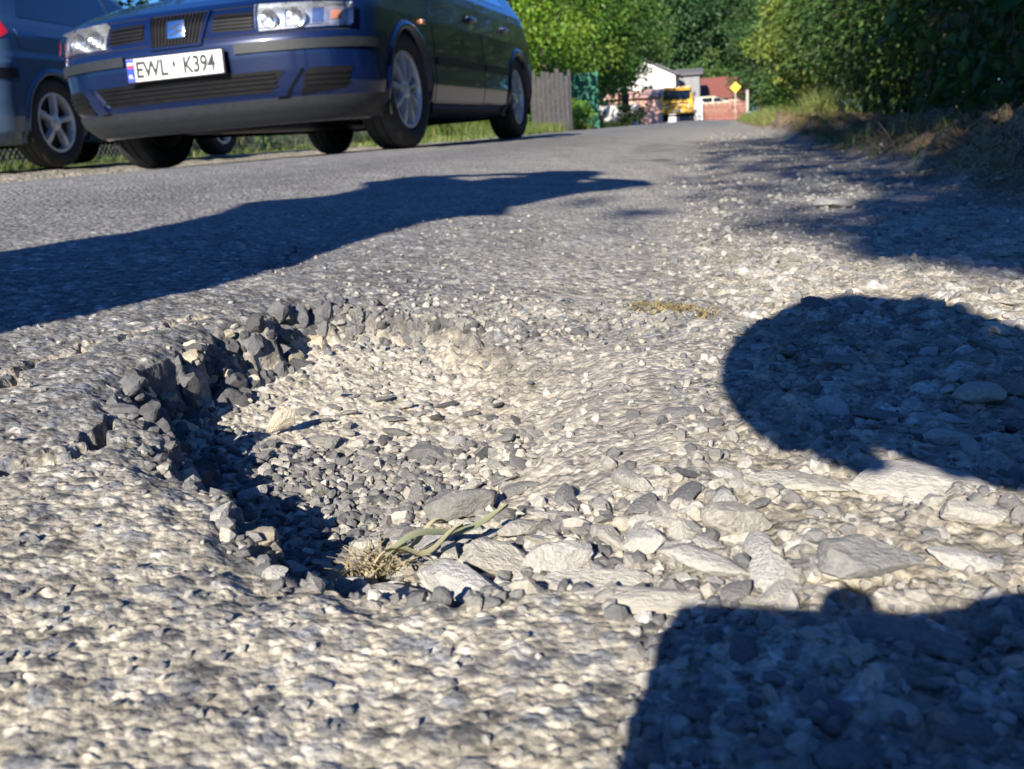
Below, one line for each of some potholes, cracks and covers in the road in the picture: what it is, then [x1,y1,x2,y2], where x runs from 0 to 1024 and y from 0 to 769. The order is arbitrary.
pothole [106,295,772,633]
